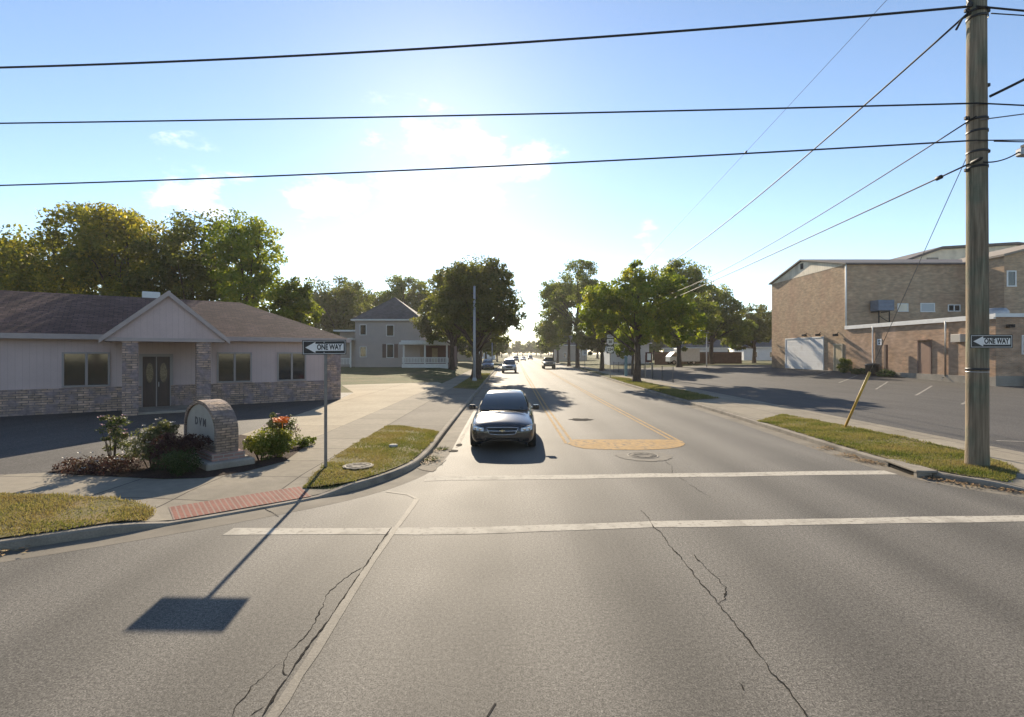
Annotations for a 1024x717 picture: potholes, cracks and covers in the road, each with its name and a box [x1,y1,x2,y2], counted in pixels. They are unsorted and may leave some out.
manhole cover [615,450,672,461]
crack [644,513,808,717]
crack [232,527,392,716]
drain grate [884,459,938,478]
